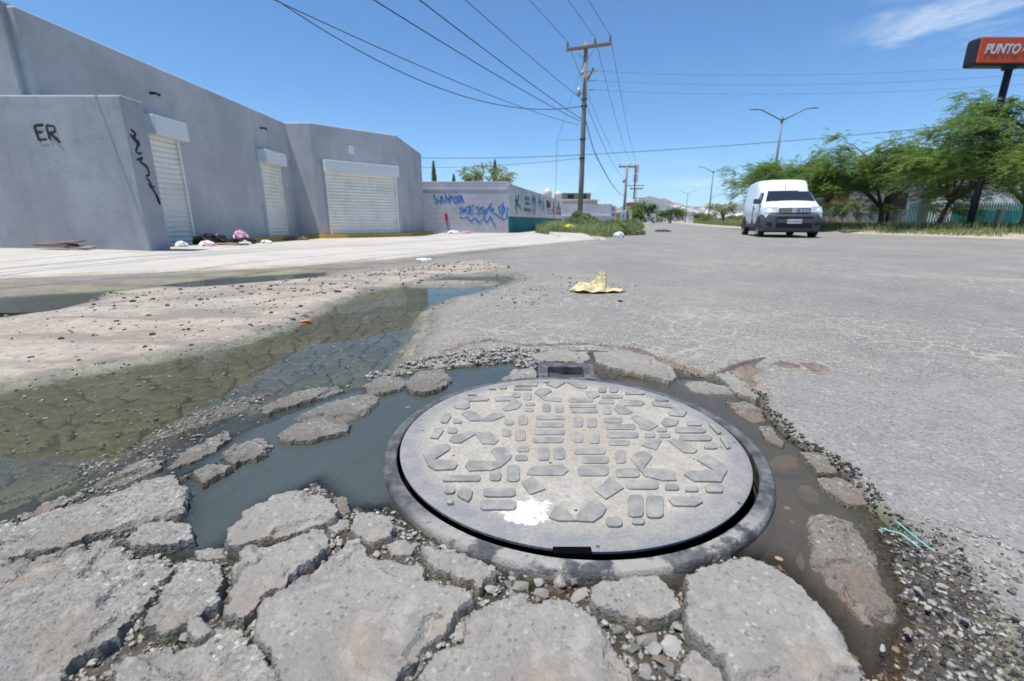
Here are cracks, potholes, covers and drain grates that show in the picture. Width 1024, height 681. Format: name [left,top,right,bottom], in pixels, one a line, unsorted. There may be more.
manhole cover [383,363,776,590]
crack [0,277,510,506]
pothole [0,274,524,514]
